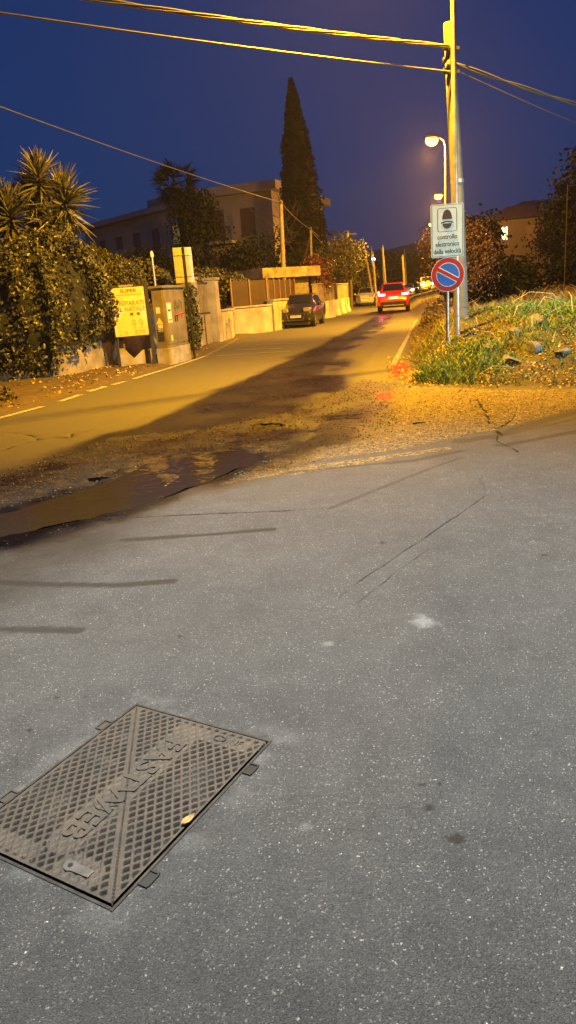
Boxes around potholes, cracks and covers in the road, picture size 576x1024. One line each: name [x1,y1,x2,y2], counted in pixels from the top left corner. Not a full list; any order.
manhole cover [0,703,272,912]
pothole [249,422,287,431]
crack [476,396,523,456]
